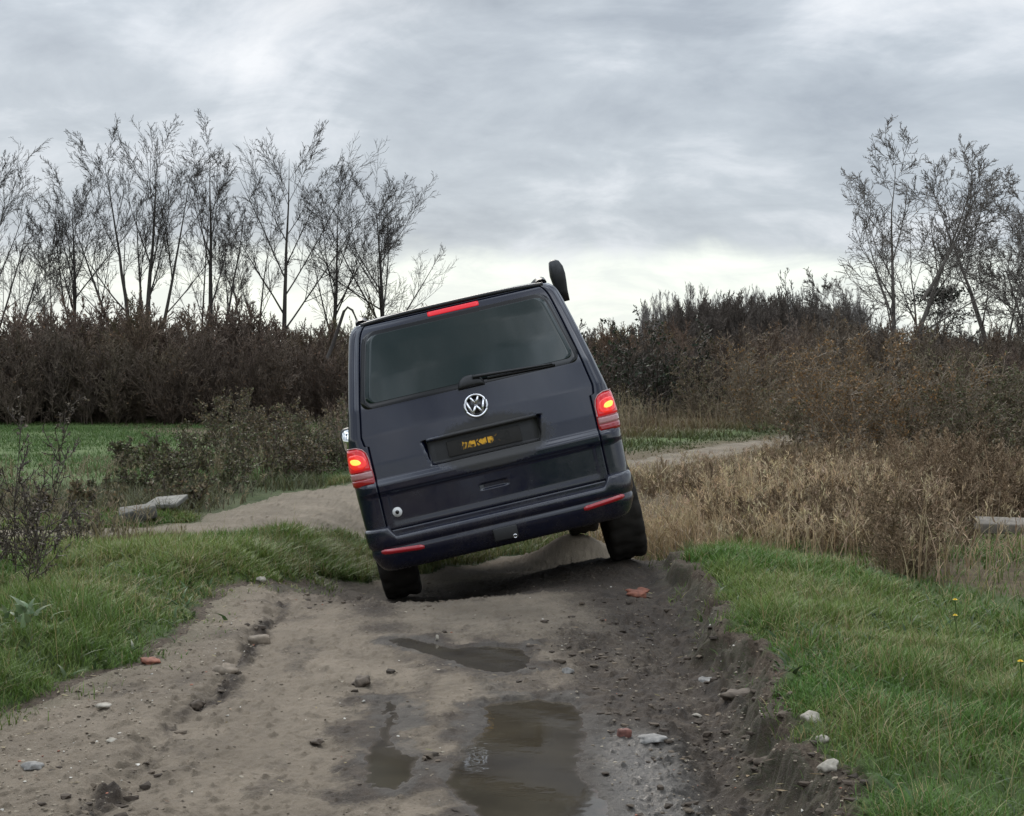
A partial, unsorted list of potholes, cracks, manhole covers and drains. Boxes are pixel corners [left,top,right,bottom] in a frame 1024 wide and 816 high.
pothole [380,634,538,673]
pothole [436,692,620,816]
pothole [353,696,427,791]
